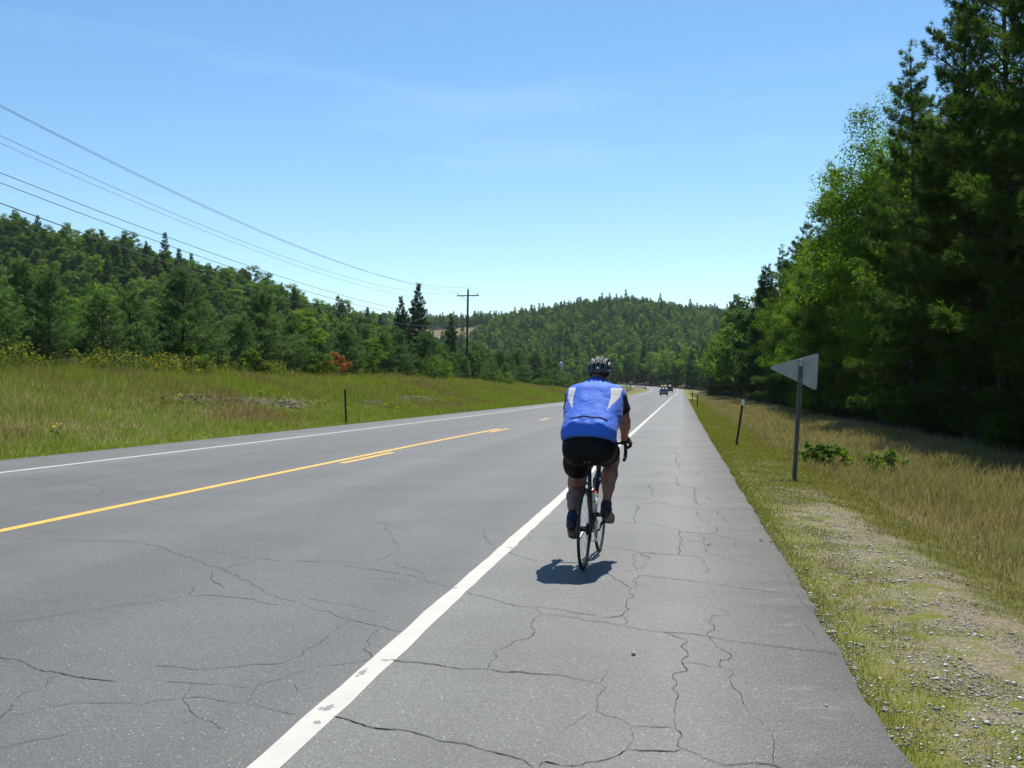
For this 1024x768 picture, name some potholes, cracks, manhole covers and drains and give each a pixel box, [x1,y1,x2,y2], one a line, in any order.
crack [2,505,458,747]
crack [335,565,835,768]
crack [608,443,772,573]
